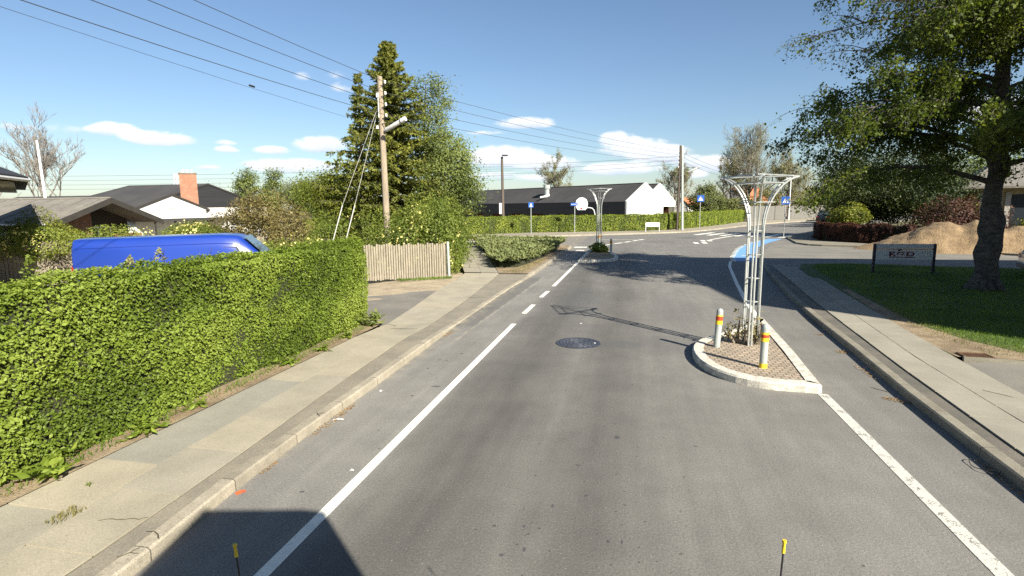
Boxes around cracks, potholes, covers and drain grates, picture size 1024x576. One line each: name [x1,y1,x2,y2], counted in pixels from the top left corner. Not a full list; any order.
manhole cover [556,337,601,349]
crack [98,517,160,539]
